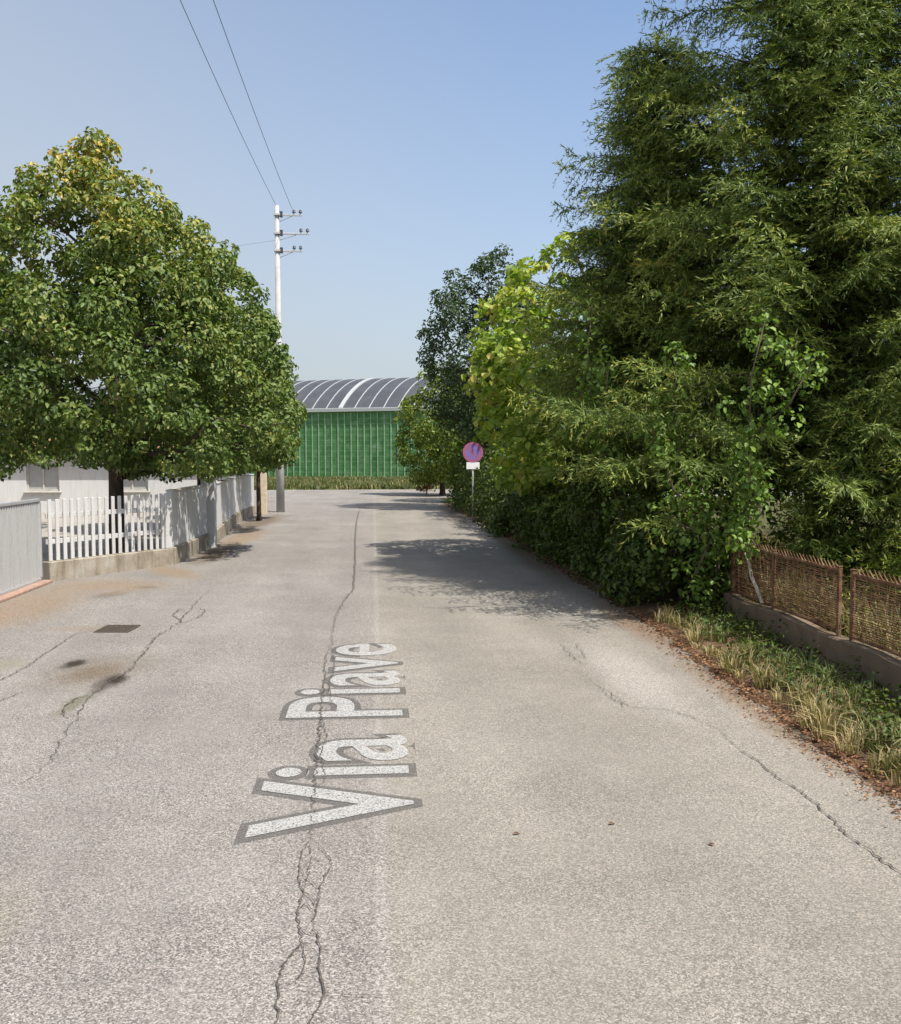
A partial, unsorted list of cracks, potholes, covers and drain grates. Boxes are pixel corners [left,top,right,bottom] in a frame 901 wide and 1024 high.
crack [562,644,901,872]
crack [17,593,206,784]
manhole cover [93,625,141,633]
crack [274,507,396,1024]
